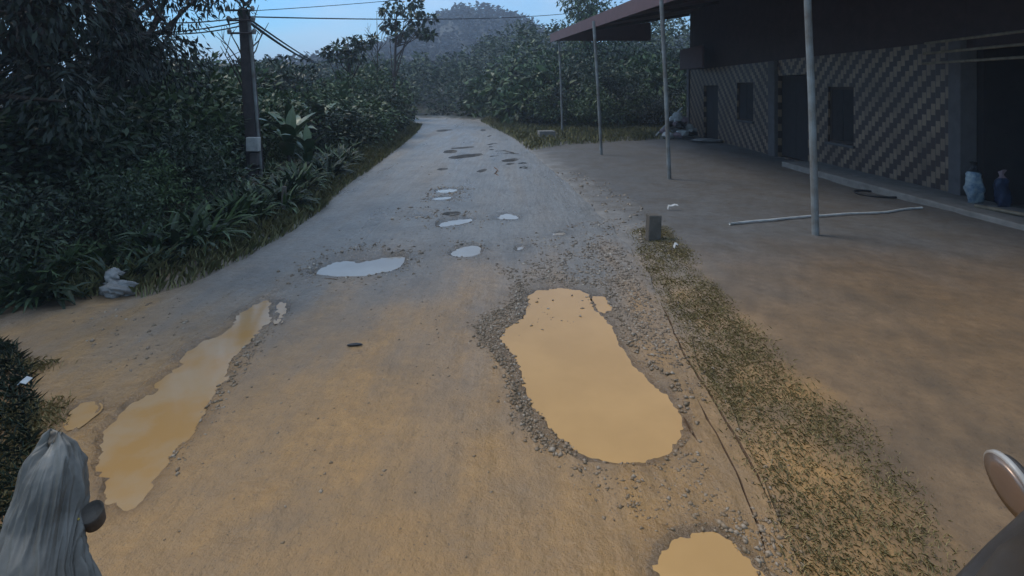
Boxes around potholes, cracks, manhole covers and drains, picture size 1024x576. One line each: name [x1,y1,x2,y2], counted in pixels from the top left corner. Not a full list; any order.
pothole [645,523,772,576]
pothole [61,398,104,432]
pothole [273,299,287,328]
pothole [472,277,700,469]
pothole [435,213,477,227]
pothole [90,296,277,525]
pothole [447,242,484,257]
pothole [496,212,521,220]
pothole [310,246,409,277]
crack [660,302,773,559]
